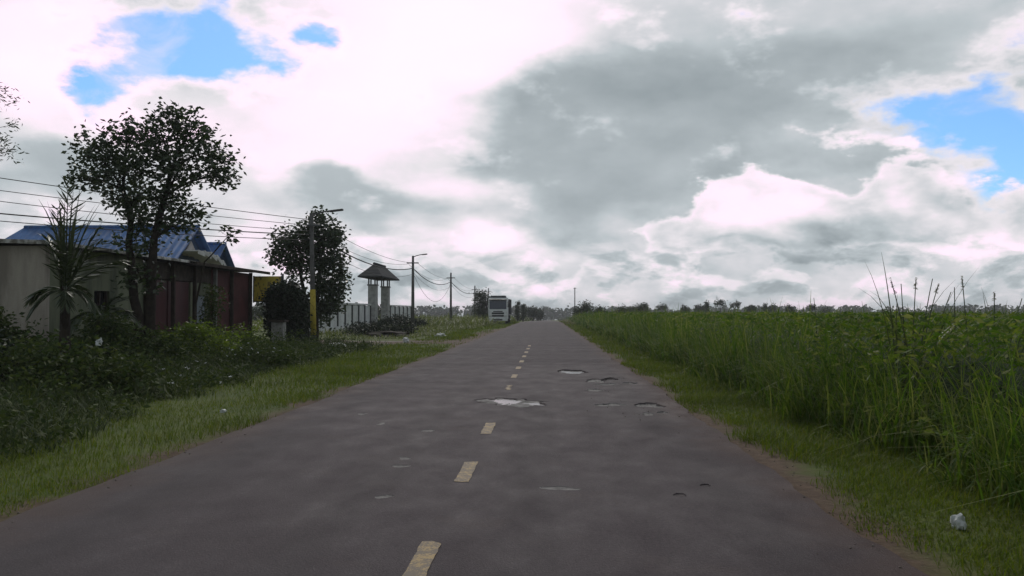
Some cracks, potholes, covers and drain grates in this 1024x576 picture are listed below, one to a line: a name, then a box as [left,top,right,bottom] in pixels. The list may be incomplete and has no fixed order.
pothole [474,398,550,407]
